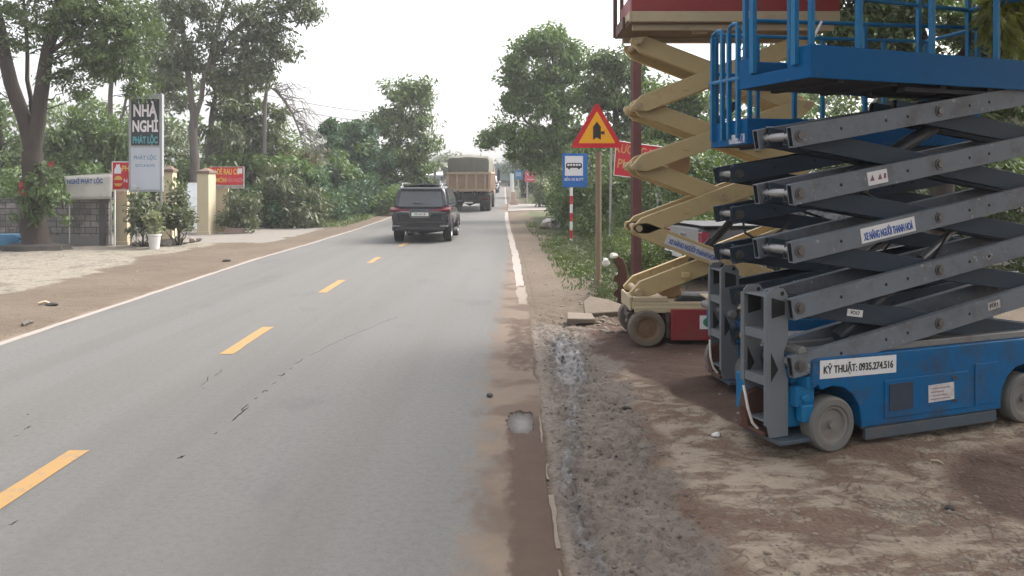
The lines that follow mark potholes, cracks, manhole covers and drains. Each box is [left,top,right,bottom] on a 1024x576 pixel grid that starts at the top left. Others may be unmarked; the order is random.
pothole [505,410,534,434]
crack [176,317,397,459]
